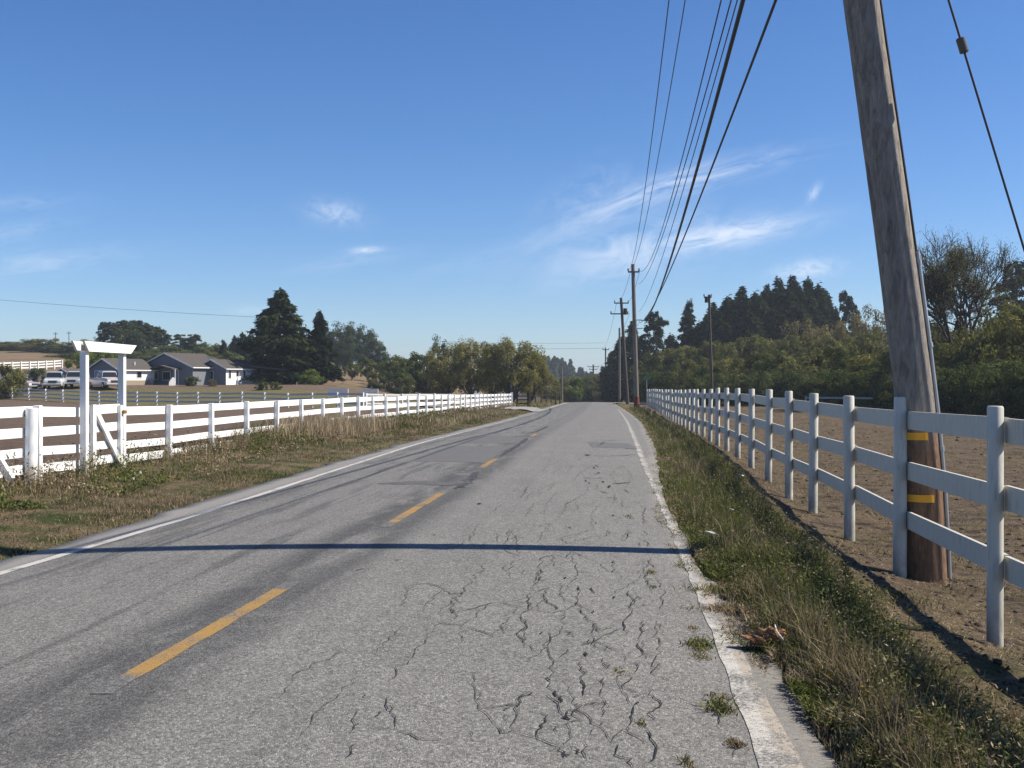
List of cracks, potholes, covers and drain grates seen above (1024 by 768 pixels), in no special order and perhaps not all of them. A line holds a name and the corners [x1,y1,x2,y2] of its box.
crack [301,440,670,766]
